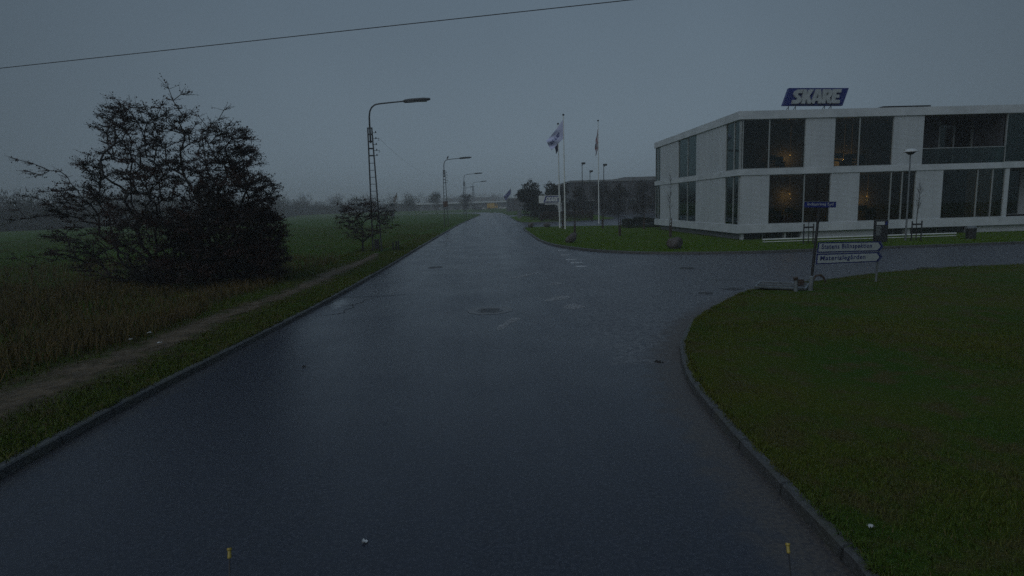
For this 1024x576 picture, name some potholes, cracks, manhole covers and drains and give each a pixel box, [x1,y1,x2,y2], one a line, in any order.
manhole cover [466,307,513,315]
